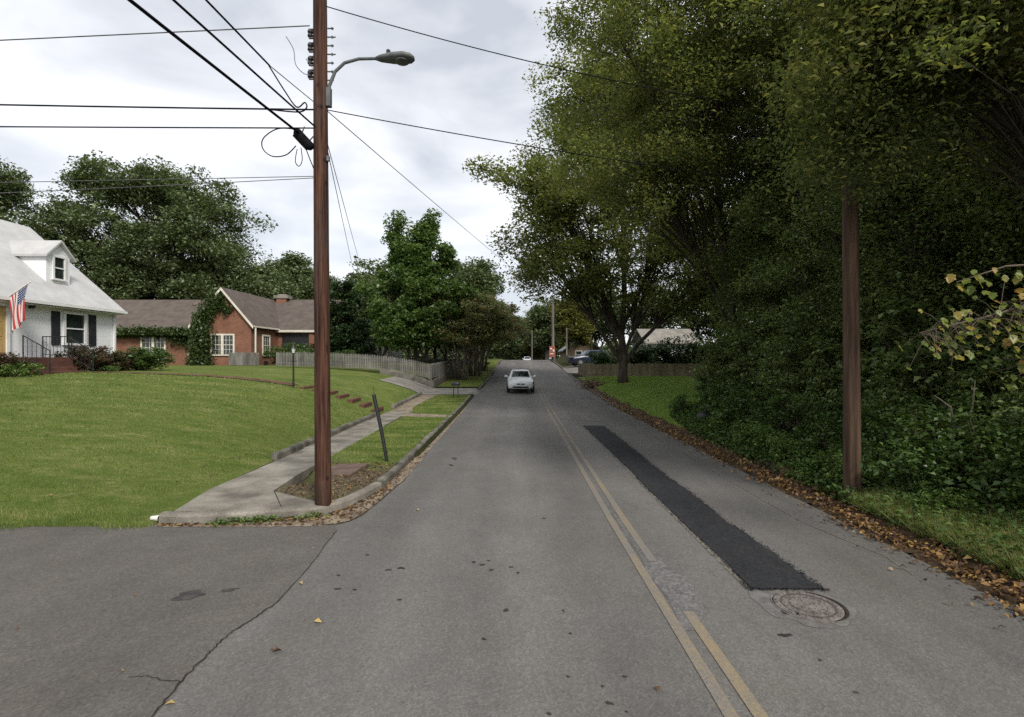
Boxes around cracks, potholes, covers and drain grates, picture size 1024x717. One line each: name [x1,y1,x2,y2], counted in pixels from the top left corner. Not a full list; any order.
manhole cover [749,590,857,628]
crack [134,478,406,717]
